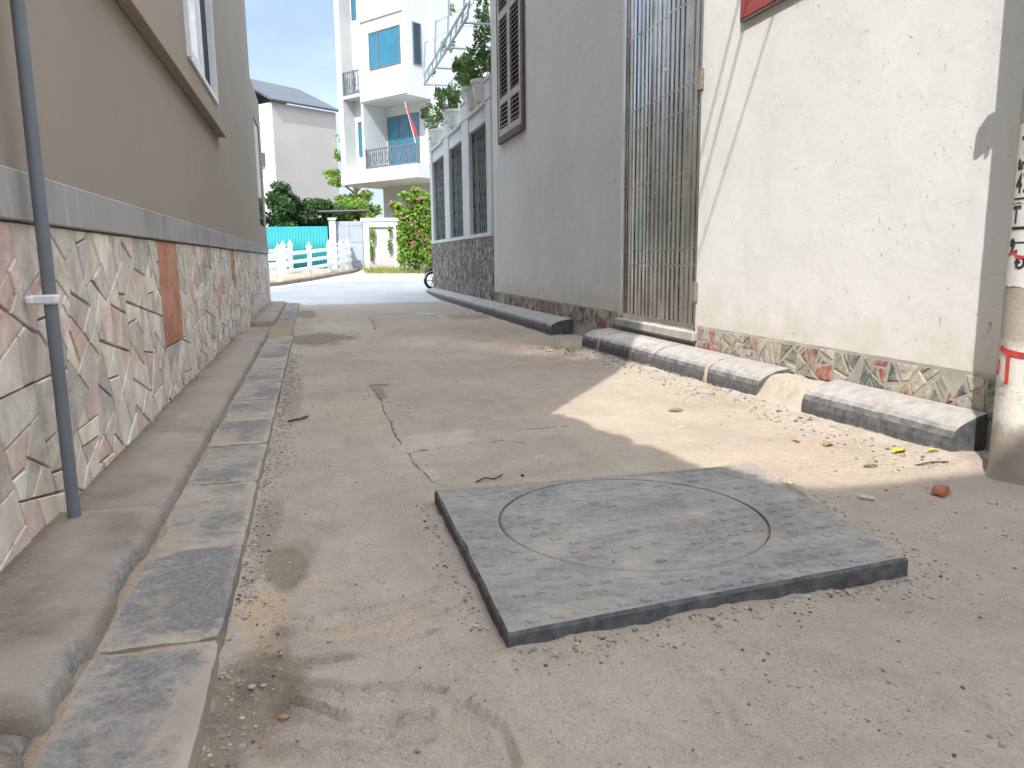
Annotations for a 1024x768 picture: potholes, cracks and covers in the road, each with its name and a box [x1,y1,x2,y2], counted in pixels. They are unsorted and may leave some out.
manhole cover [434,464,908,648]
crack [371,387,567,481]
